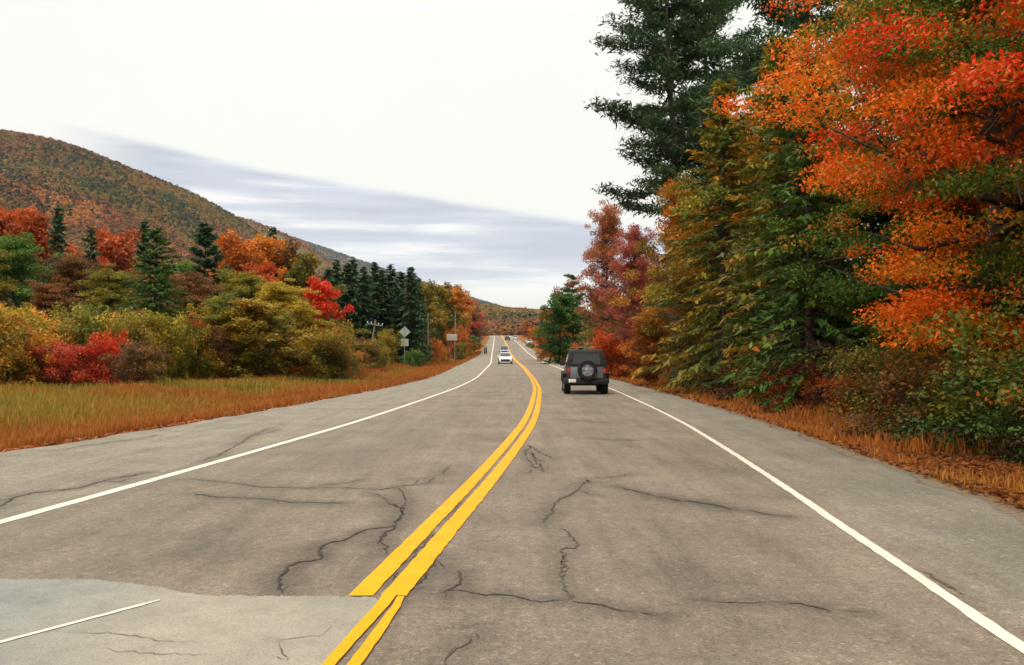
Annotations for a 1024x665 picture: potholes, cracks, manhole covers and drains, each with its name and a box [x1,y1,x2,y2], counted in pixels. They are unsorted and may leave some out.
crack [709,600,873,613]
crack [195,445,790,616]
crack [60,631,203,655]
crack [0,472,146,506]
